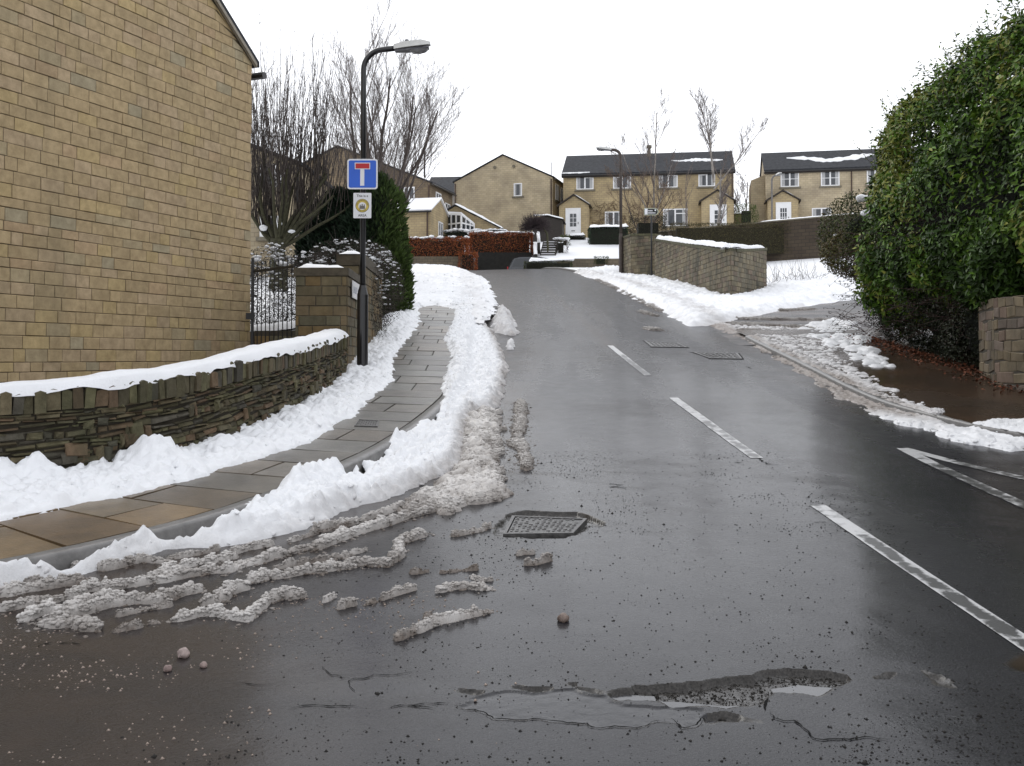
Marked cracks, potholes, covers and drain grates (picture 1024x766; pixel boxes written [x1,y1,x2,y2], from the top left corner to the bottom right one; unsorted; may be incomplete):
manhole cover [354,419,379,427]
crack [763,697,879,740]
pothole [606,668,852,709]
crack [457,706,704,728]
manhole cover [503,515,587,539]
crack [293,666,411,708]
